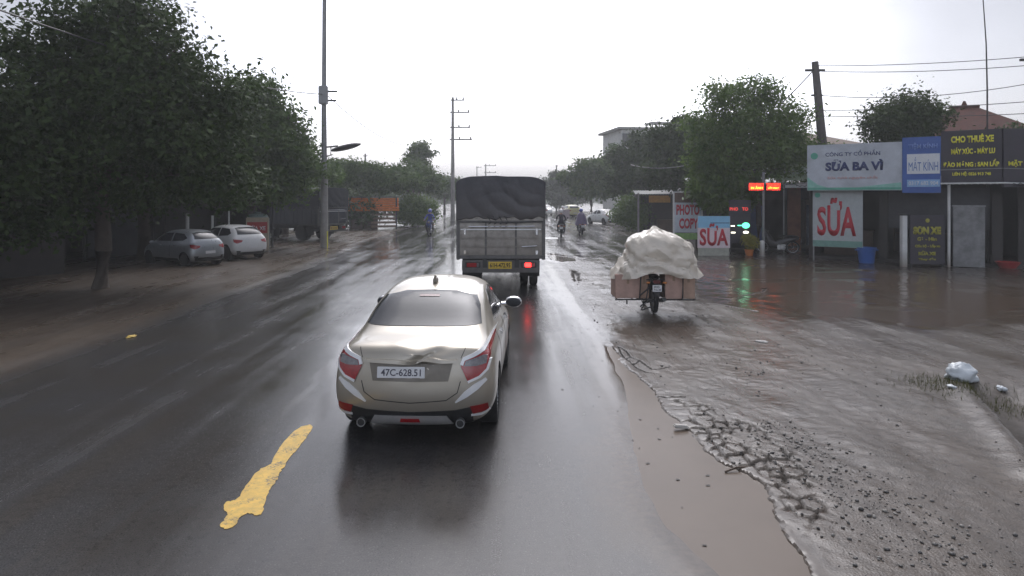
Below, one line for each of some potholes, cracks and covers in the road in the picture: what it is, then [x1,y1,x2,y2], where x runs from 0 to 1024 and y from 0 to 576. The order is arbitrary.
crack [617,346,839,548]
